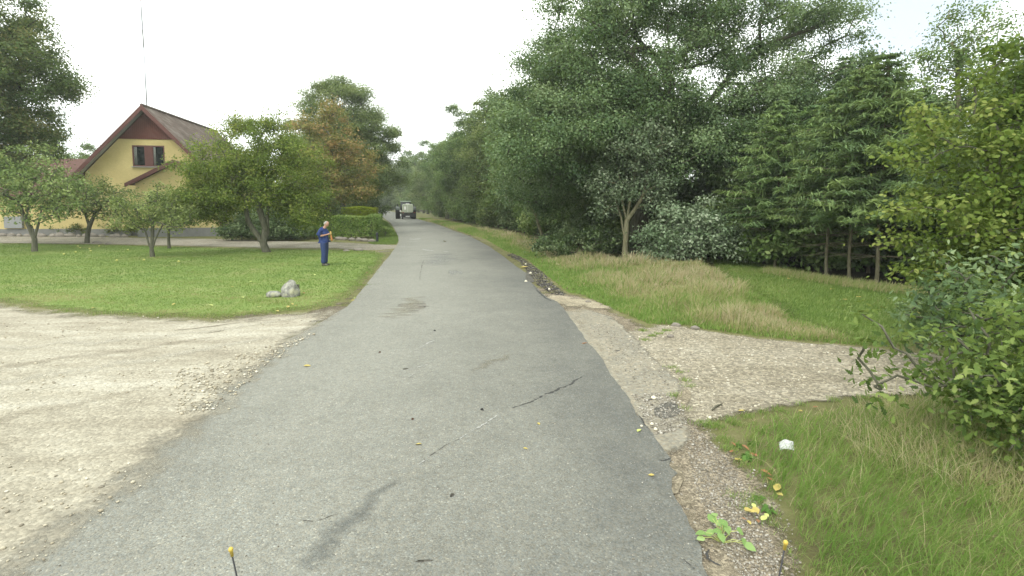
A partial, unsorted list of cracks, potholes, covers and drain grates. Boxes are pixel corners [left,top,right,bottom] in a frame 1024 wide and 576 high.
crack [419,377,581,464]
